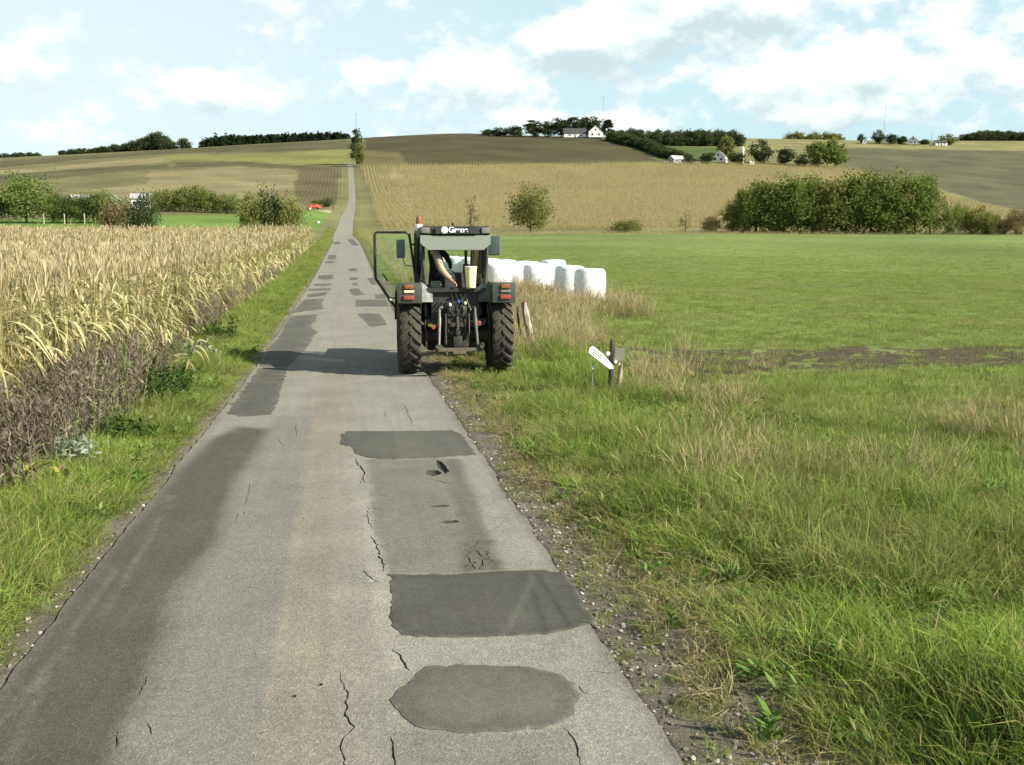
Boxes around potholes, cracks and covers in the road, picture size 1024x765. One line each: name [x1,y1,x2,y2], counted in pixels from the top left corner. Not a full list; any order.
crack [363,506,385,580]
crack [464,541,492,569]
crack [339,673,355,765]
crack [392,647,409,670]
crack [560,727,581,765]
